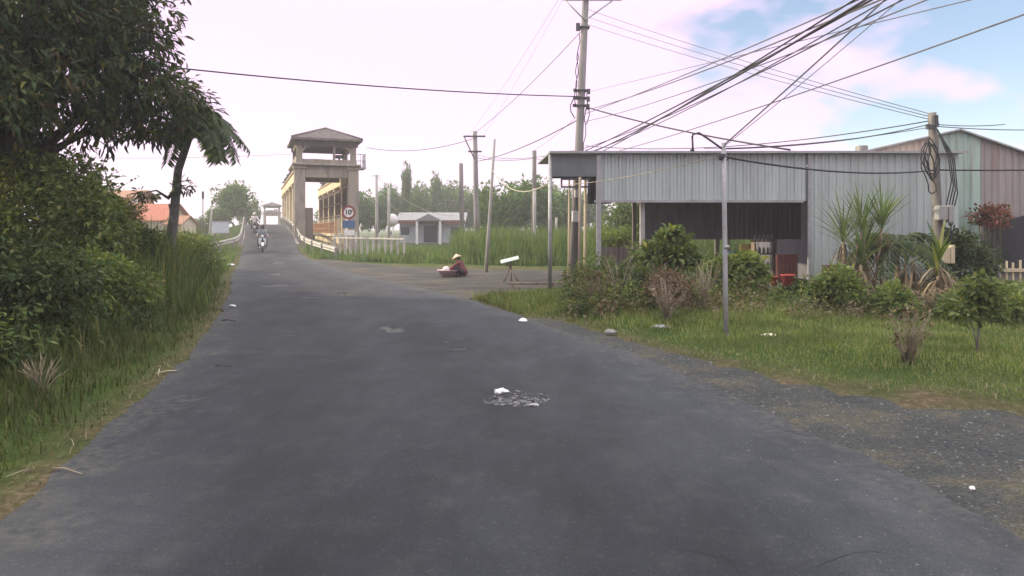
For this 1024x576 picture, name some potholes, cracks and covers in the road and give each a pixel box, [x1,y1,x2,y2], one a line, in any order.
pothole [483,390,550,408]
